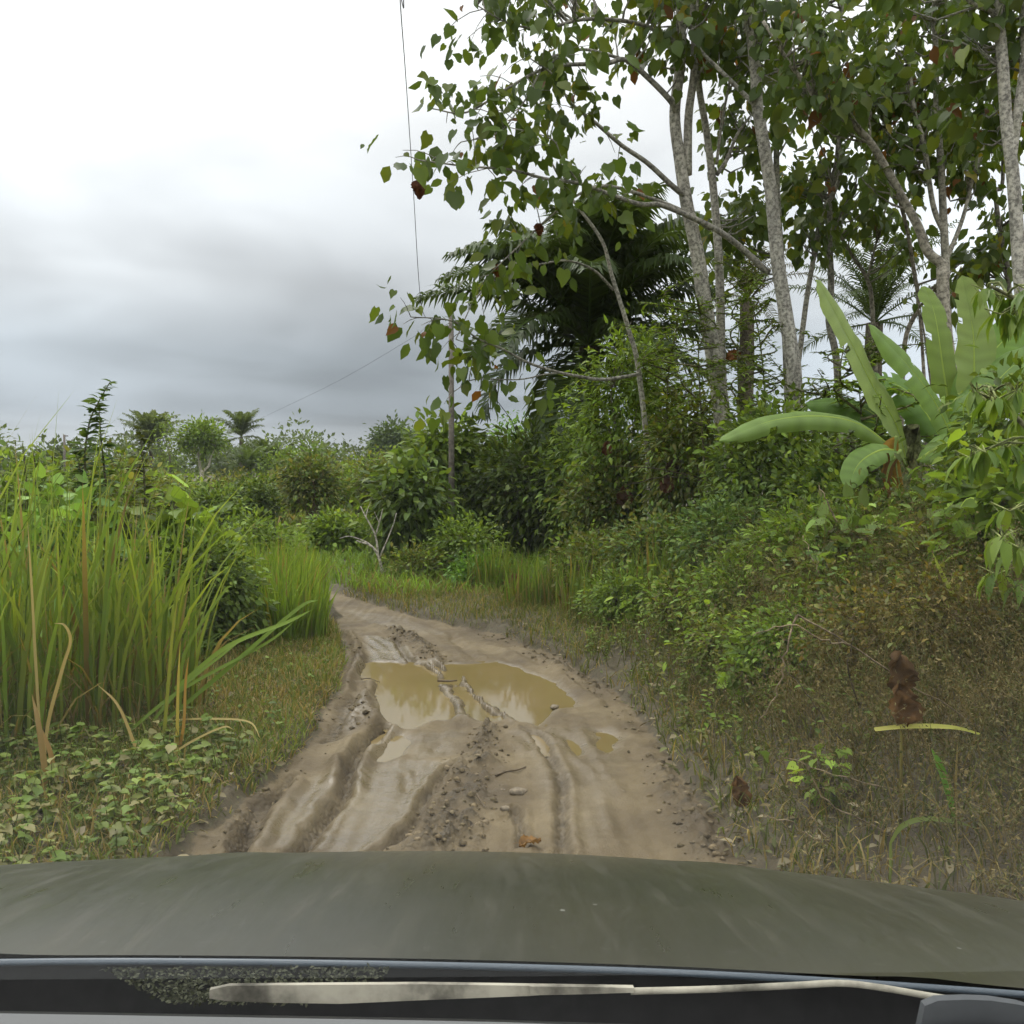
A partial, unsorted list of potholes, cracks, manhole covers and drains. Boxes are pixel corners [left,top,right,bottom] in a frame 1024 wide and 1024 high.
pothole [362,725,421,765]
pothole [582,724,632,755]
pothole [351,654,587,733]
